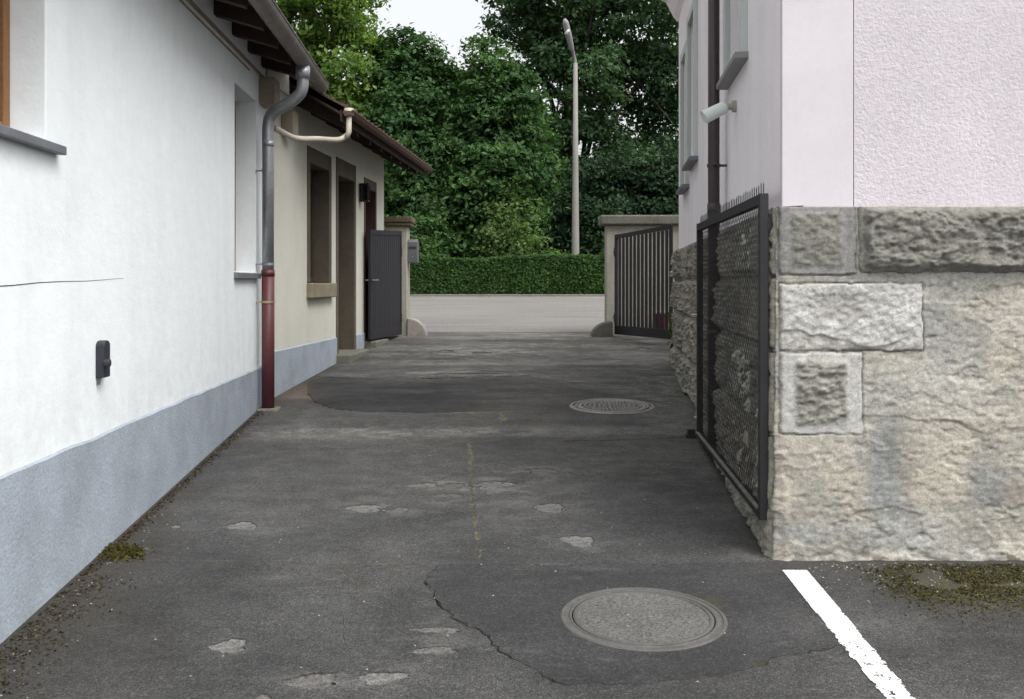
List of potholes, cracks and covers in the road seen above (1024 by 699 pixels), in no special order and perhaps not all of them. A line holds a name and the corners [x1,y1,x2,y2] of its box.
pothole [532,502,564,513]
manhole cover [569,398,655,414]
pothole [207,637,247,653]
pothole [476,480,516,490]
pothole [557,535,595,547]
pothole [356,671,410,685]
pothole [224,521,258,530]
pothole [344,504,381,513]
crack [424,443,838,686]
manhole cover [560,587,728,652]
pothole [409,646,458,655]
